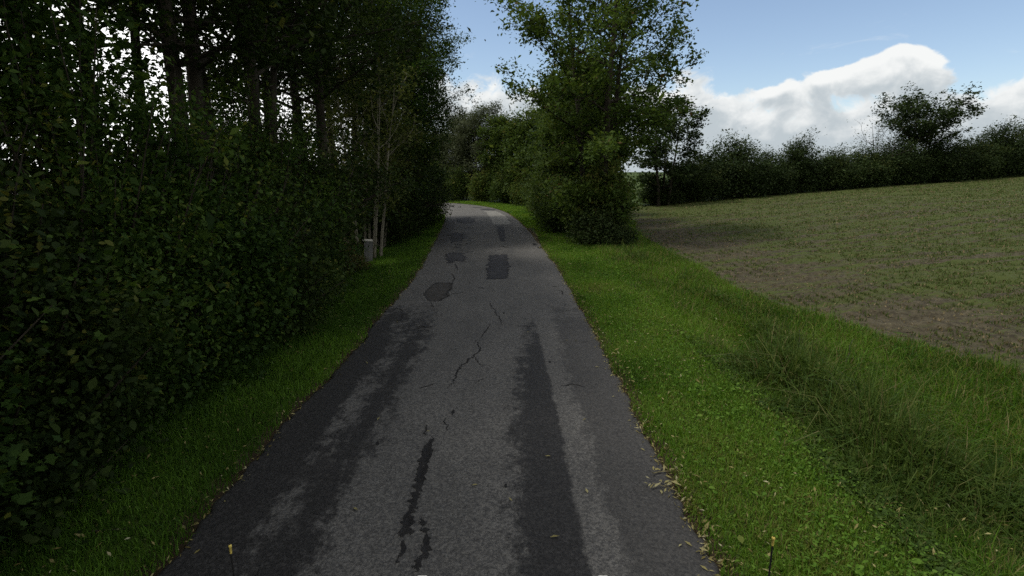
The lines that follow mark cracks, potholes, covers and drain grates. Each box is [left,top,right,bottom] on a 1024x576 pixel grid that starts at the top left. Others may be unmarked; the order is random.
crack [418,287,502,389]
